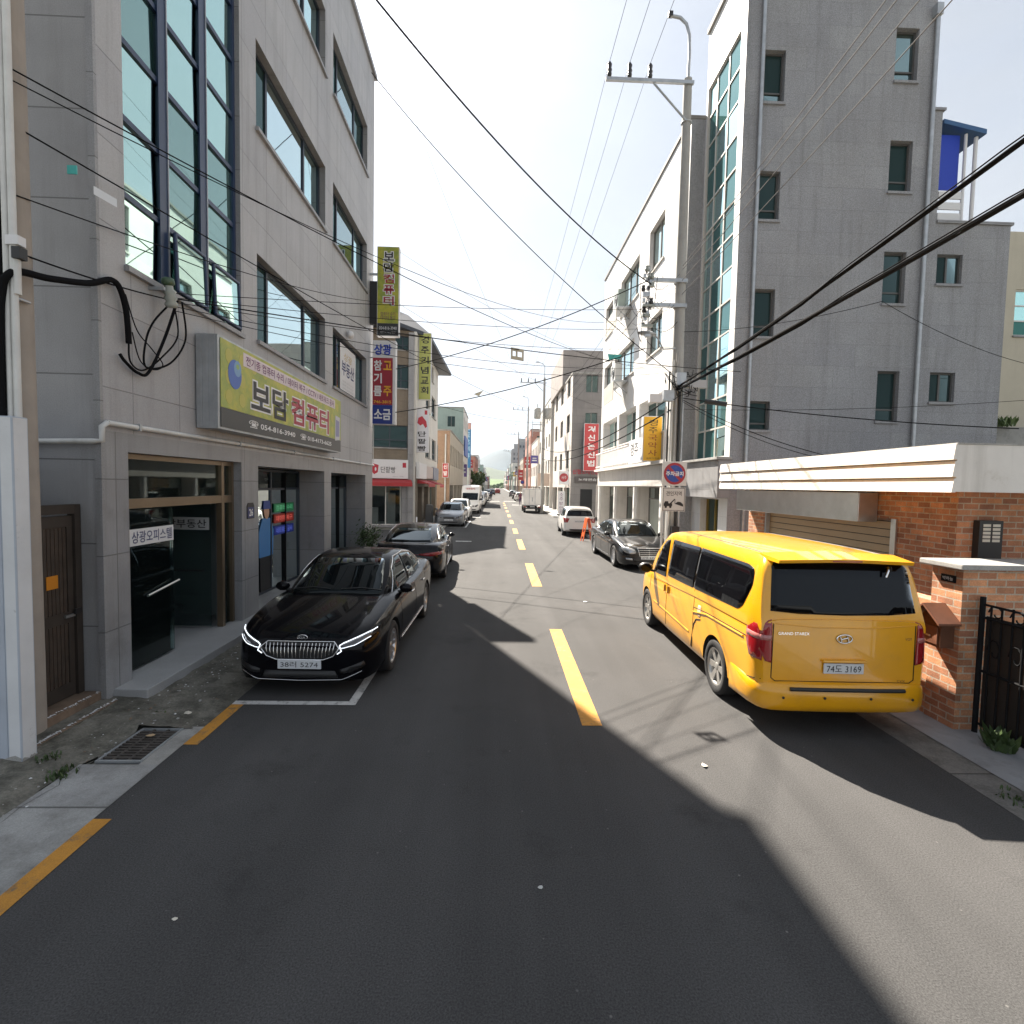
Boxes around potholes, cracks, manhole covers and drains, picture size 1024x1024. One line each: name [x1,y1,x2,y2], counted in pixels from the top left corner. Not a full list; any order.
drain grate [95,728,184,764]
